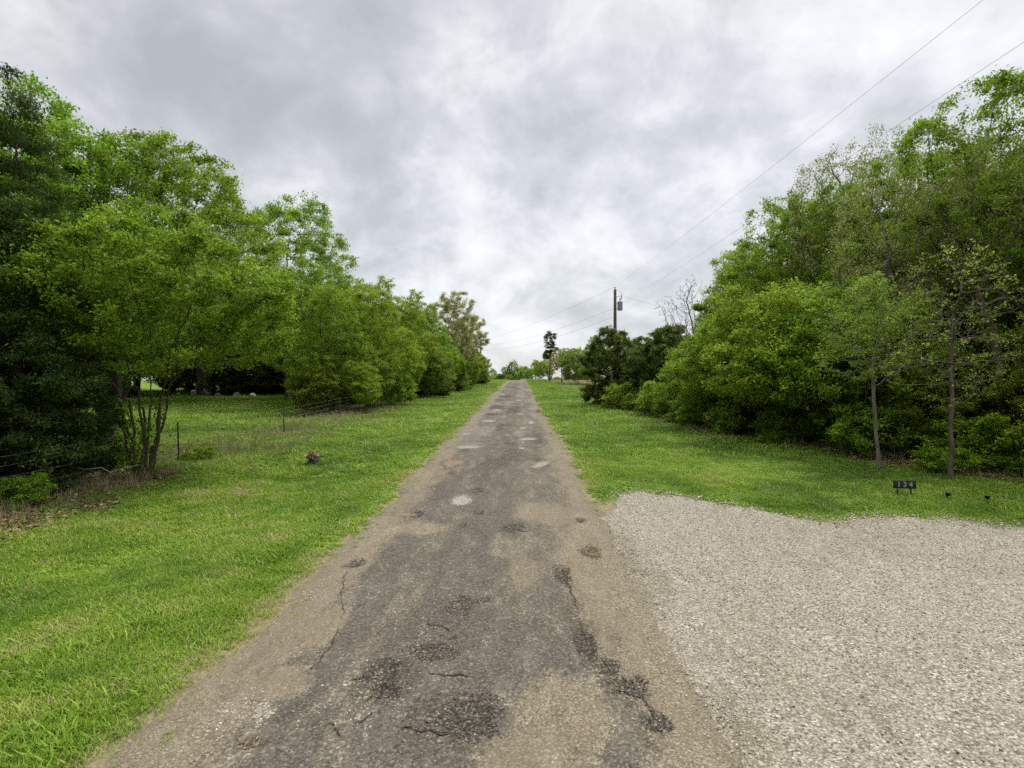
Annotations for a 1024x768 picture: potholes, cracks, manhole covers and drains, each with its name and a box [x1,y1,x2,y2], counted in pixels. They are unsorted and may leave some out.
pothole [552,564,572,587]
pothole [575,542,601,560]
pothole [441,594,479,615]
pothole [640,706,675,733]
crack [300,566,353,674]
pothole [397,641,461,661]
pothole [607,674,651,698]
pothole [356,656,402,685]
pothole [372,681,401,699]
pothole [596,659,622,677]
pothole [425,692,506,744]
pothole [574,630,599,662]
